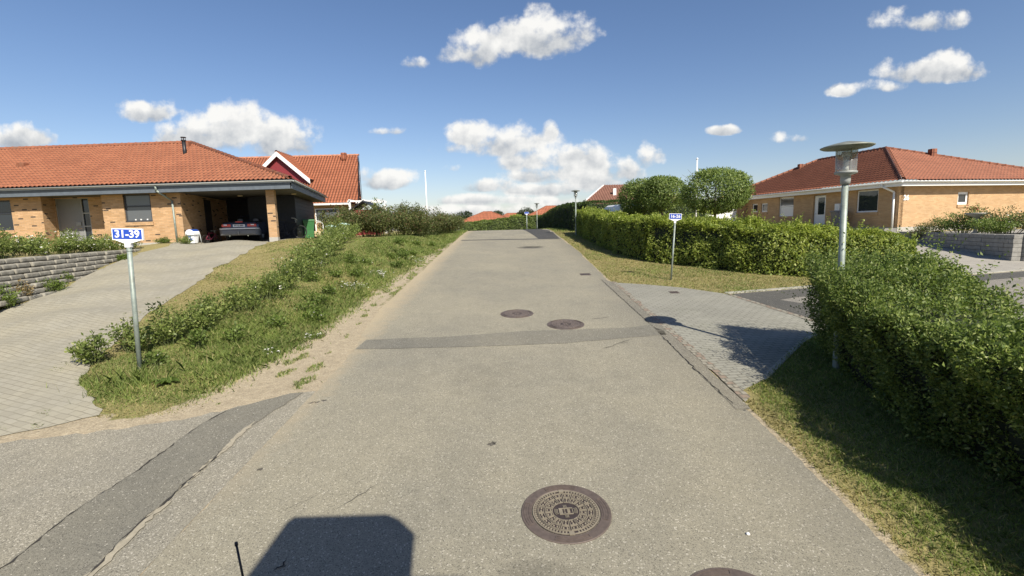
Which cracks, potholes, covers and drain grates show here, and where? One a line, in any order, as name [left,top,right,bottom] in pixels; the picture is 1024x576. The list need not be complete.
manhole cover [690,567,755,576]
manhole cover [521,485,612,545]
manhole cover [547,319,584,330]
manhole cover [500,309,534,318]
